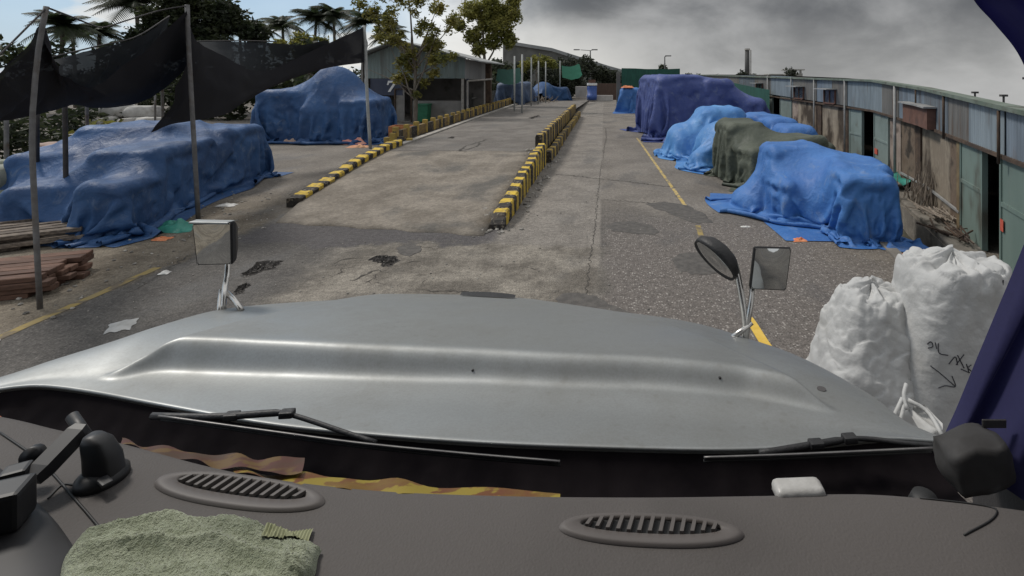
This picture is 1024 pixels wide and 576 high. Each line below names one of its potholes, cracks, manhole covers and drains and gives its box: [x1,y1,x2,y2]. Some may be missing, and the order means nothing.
pothole [233,282,251,295]
crack [327,247,427,286]
pothole [368,255,401,267]
pothole [240,260,284,277]
